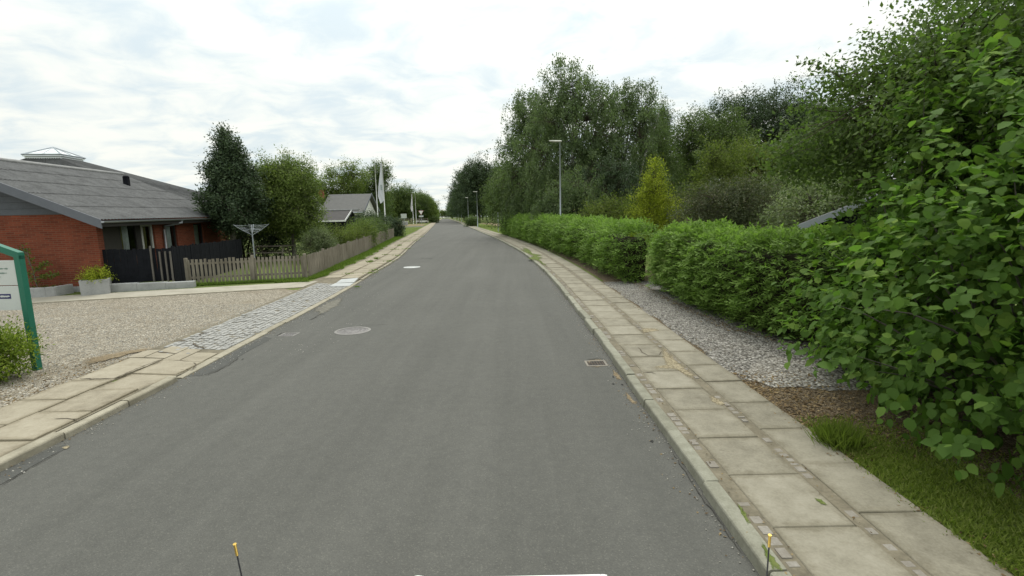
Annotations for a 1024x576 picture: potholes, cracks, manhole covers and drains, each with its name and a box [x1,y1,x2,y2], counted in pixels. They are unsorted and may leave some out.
manhole cover [334,327,371,335]
